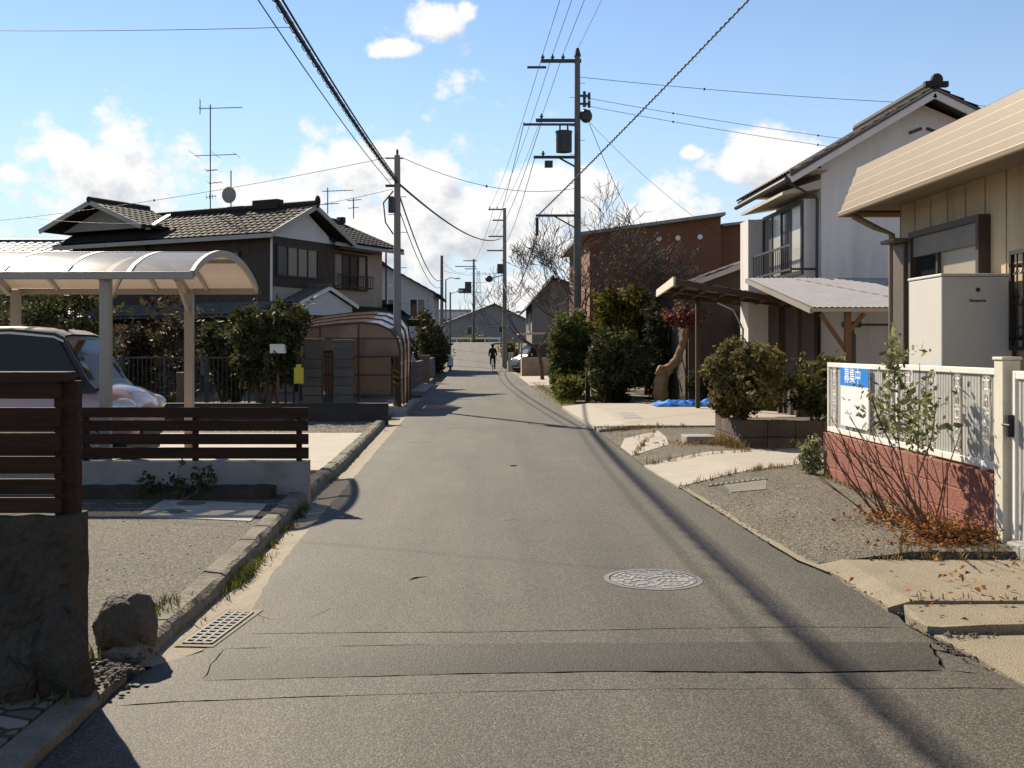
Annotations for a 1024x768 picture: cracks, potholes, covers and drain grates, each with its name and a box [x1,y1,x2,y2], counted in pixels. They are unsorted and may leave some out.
manhole cover [604,569,703,590]
drain grate [174,609,264,656]
crack [202,607,976,679]
